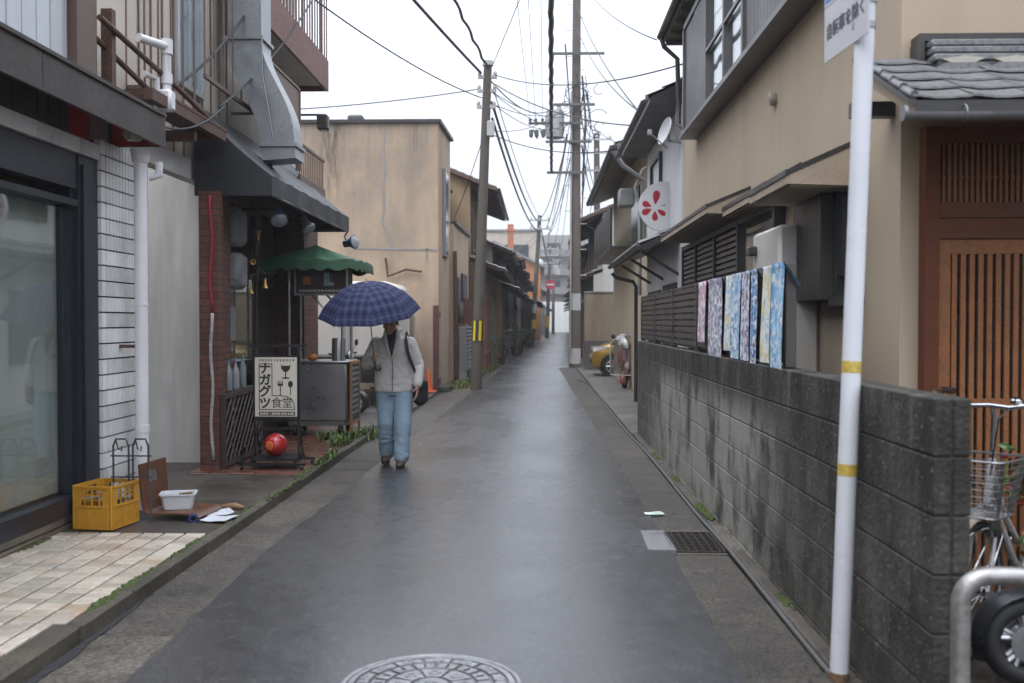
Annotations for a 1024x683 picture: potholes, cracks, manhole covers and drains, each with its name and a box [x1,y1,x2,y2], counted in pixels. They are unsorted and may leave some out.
drain grate [641,530,727,555]
manhole cover [340,654,523,683]
